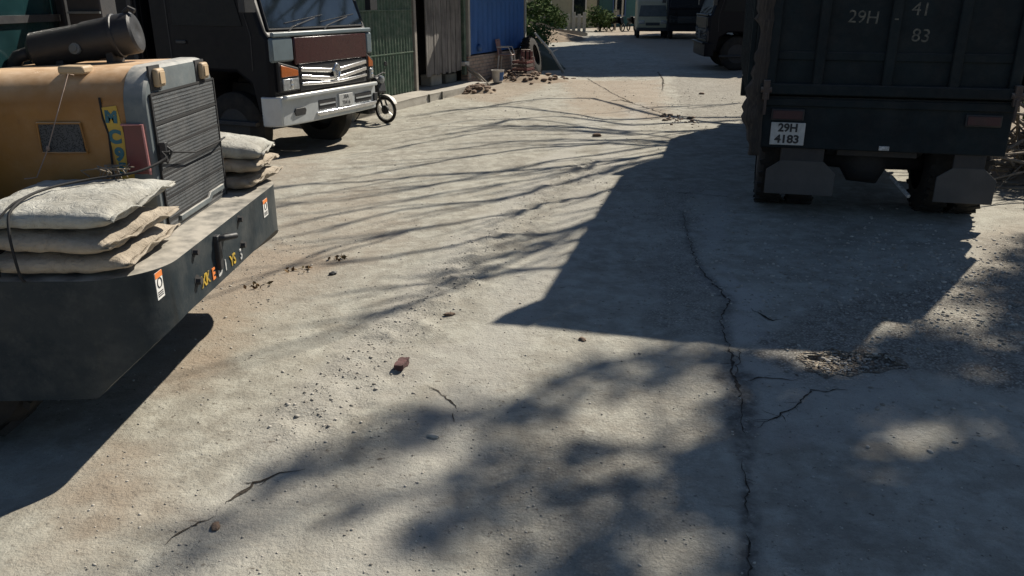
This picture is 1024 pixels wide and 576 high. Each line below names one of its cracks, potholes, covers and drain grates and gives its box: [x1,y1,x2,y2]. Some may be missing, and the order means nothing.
crack [747,375,845,428]
pothole [796,348,910,379]
crack [165,469,303,545]
